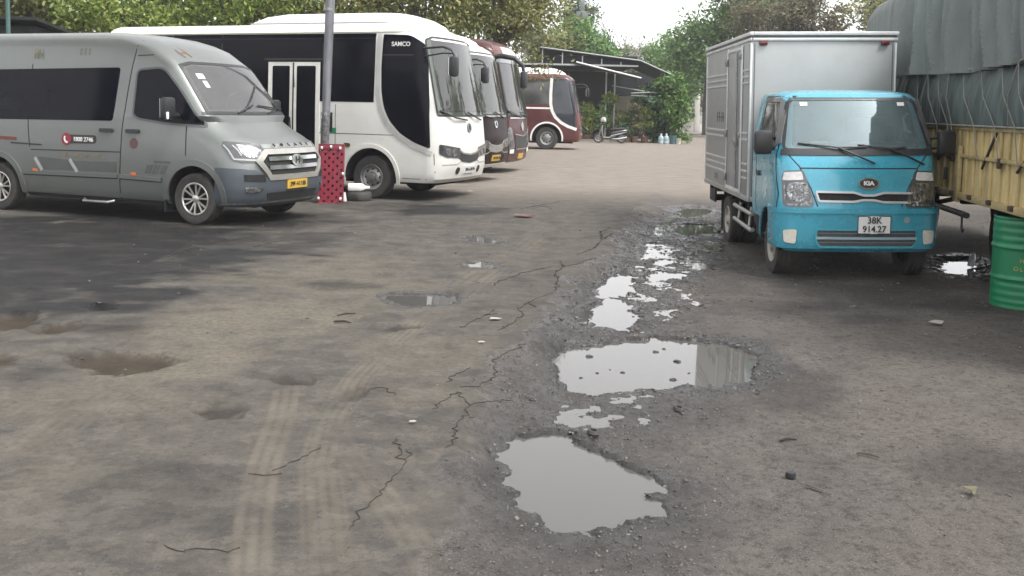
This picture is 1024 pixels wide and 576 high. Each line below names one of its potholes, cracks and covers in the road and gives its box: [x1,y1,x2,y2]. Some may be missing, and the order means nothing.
crack [164,545,240,553]
pothole [643,270,694,282]
pothole [649,258,684,267]
pothole [0,311,57,332]
pothole [457,261,501,269]
crack [349,438,412,530]
pothole [454,235,508,244]
pothole [58,348,190,378]
pothole [588,268,646,299]
pothole [23,321,92,337]
pothole [182,401,261,422]
pothole [572,298,653,332]
